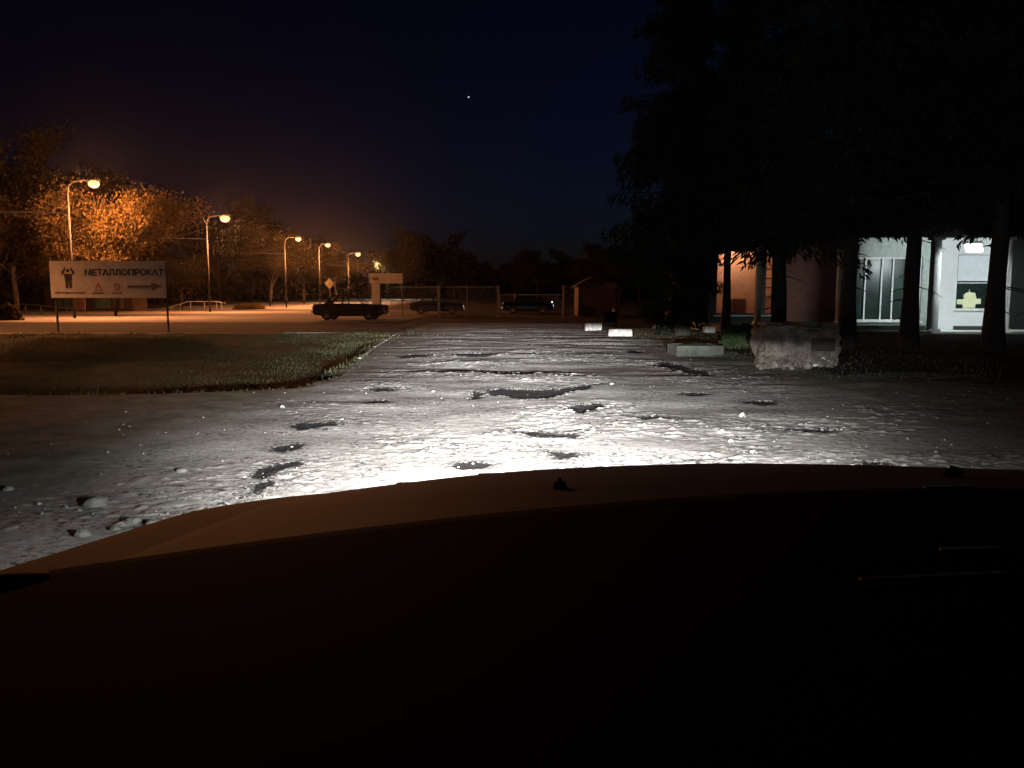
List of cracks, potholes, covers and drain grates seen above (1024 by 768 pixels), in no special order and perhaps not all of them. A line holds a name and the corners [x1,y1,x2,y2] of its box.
pothole [232,478,293,499]
pothole [645,360,722,376]
pothole [474,382,609,400]
pothole [281,418,352,431]
pothole [437,460,507,472]
pothole [243,459,316,480]
pothole [772,426,864,434]
pothole [258,442,315,454]
pothole [504,427,590,440]
pothole [728,398,792,406]
pothole [461,390,489,400]
pothole [562,402,613,414]
